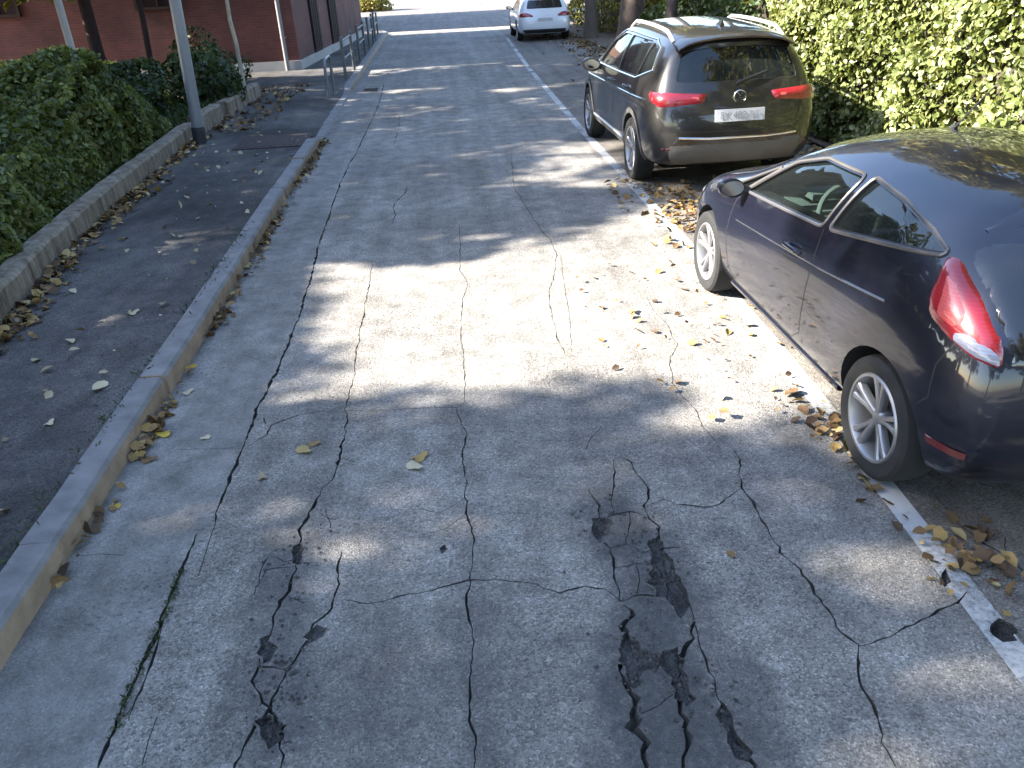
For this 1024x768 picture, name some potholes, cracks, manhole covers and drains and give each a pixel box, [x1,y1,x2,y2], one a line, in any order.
manhole cover [232,133,313,151]
pothole [618,629,662,689]
pothole [646,535,690,619]
pothole [715,702,753,762]
pothole [659,646,697,707]
pothole [591,518,612,543]
crack [97,85,966,768]
